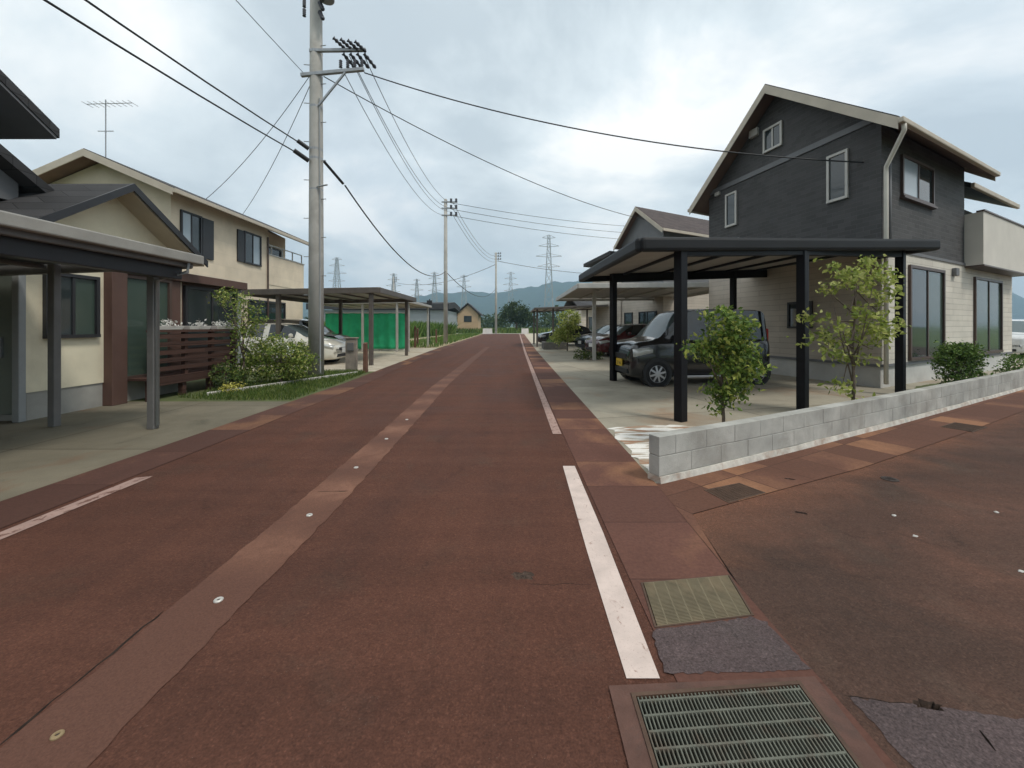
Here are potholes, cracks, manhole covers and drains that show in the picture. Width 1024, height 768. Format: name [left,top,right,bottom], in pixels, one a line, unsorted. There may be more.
drain grate [705,483,766,505]
drain grate [631,680,864,768]
